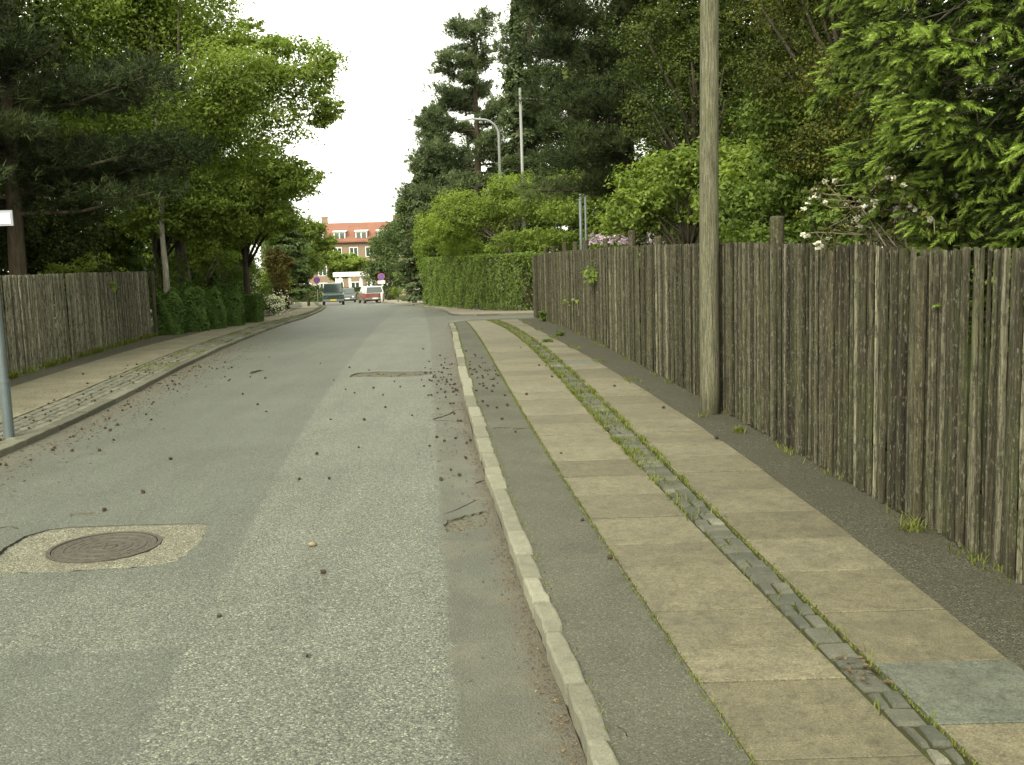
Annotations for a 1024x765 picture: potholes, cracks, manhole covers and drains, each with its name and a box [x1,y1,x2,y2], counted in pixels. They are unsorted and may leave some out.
pothole [443,511,490,533]
manhole cover [0,525,207,574]
